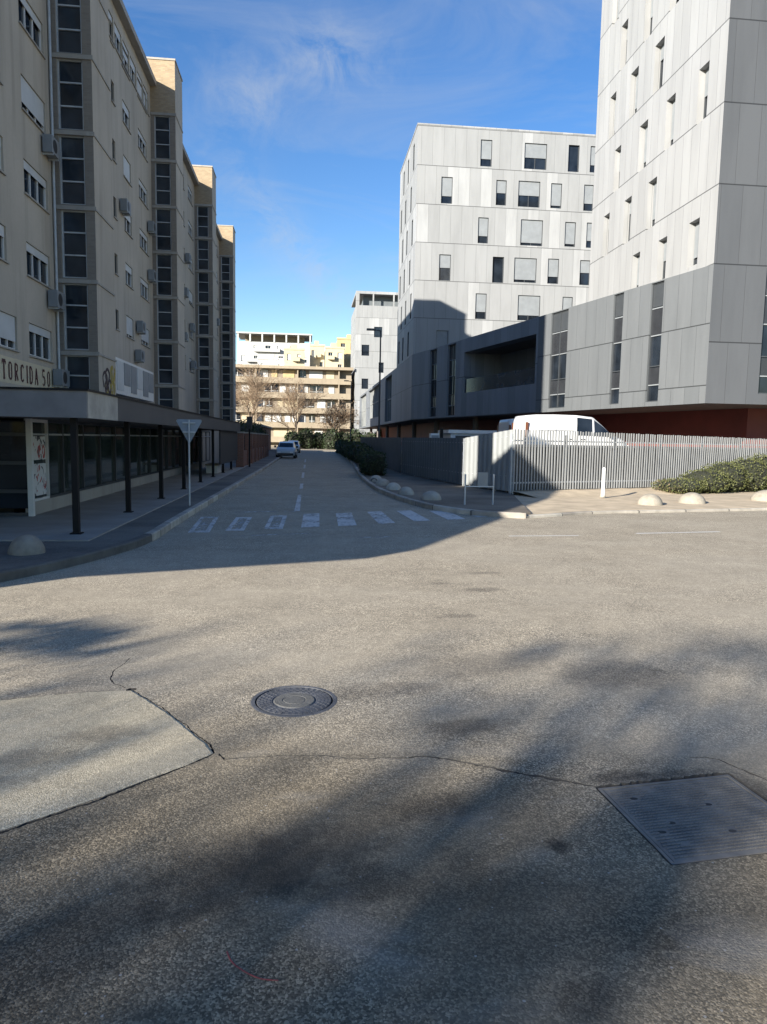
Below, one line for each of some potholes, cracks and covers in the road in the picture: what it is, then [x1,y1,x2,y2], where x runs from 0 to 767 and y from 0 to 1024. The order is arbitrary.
manhole cover [250,685,337,717]
crack [690,757,766,780]
crack [0,658,591,834]
manhole cover [595,772,767,865]
